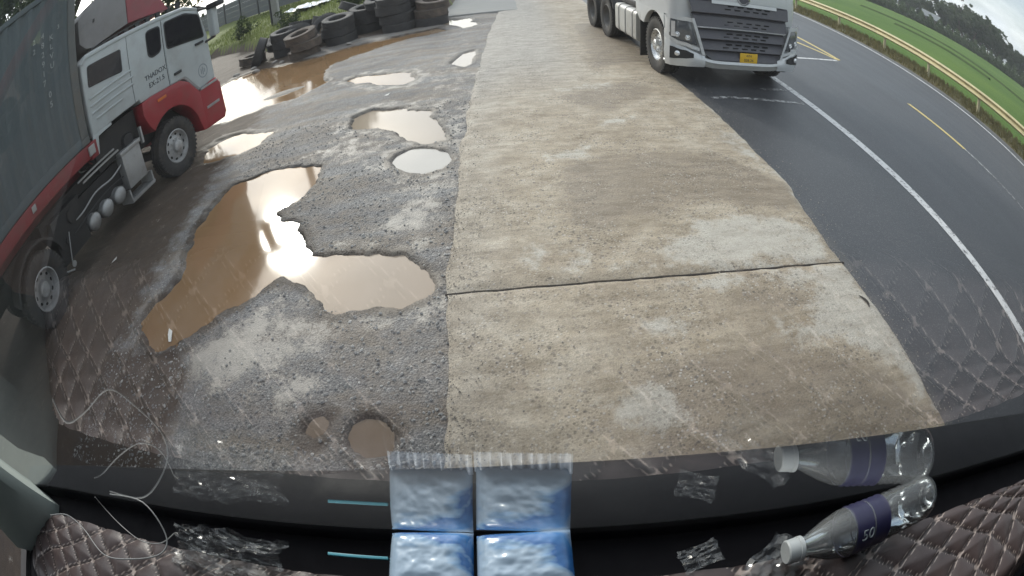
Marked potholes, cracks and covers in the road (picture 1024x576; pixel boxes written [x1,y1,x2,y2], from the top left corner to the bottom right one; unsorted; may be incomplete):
pothole [382,143,460,178]
pothole [287,401,344,452]
pothole [344,104,454,147]
pothole [332,404,411,466]
pothole [444,47,482,69]
pothole [193,127,283,168]
pothole [442,16,484,29]
pothole [212,25,453,127]
pothole [131,159,446,362]
